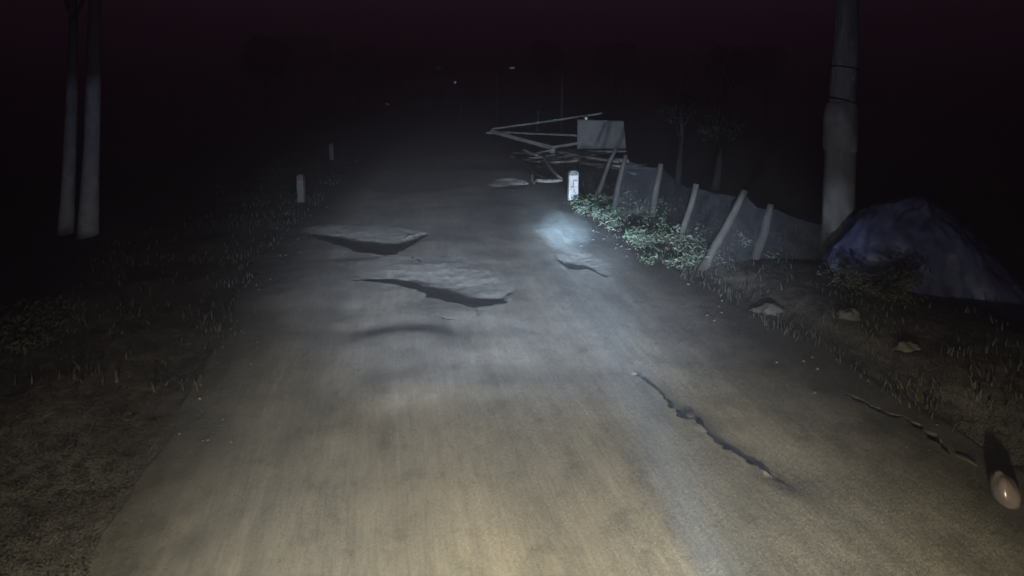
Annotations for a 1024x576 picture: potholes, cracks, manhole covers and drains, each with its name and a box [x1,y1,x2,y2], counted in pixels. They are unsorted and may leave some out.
crack [825,385,951,454]
pothole [487,177,529,190]
pothole [344,260,515,308]
pothole [302,223,429,256]
crack [637,374,753,465]
pothole [552,249,611,278]
